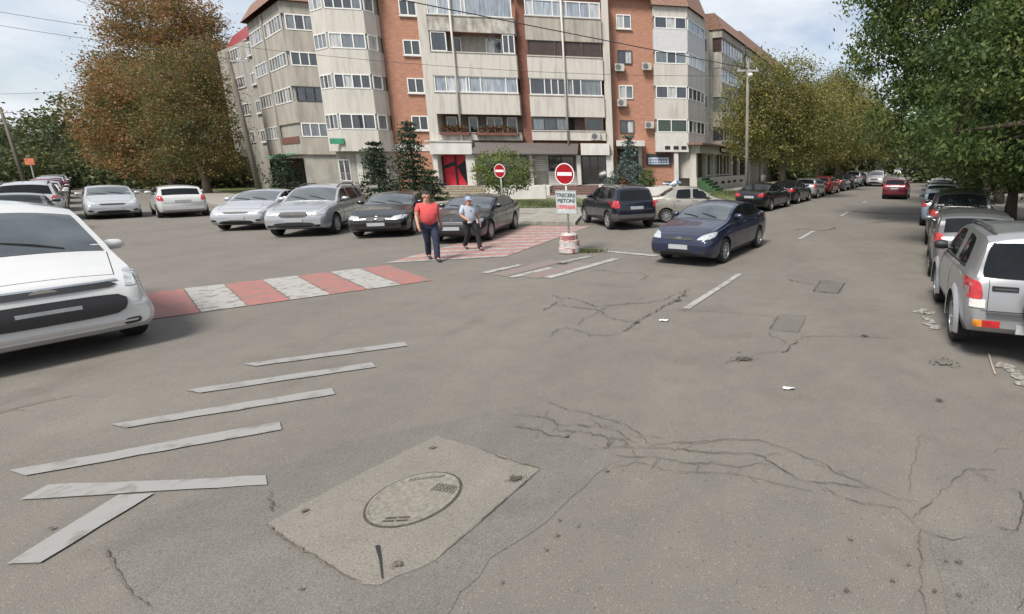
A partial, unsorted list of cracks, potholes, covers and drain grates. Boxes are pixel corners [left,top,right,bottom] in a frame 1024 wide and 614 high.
pothole [929,357,961,368]
crack [105,548,152,608]
crack [516,401,971,548]
crack [998,488,1024,530]
crack [543,288,886,364]
manhole cover [363,472,462,528]
crack [446,447,539,549]
